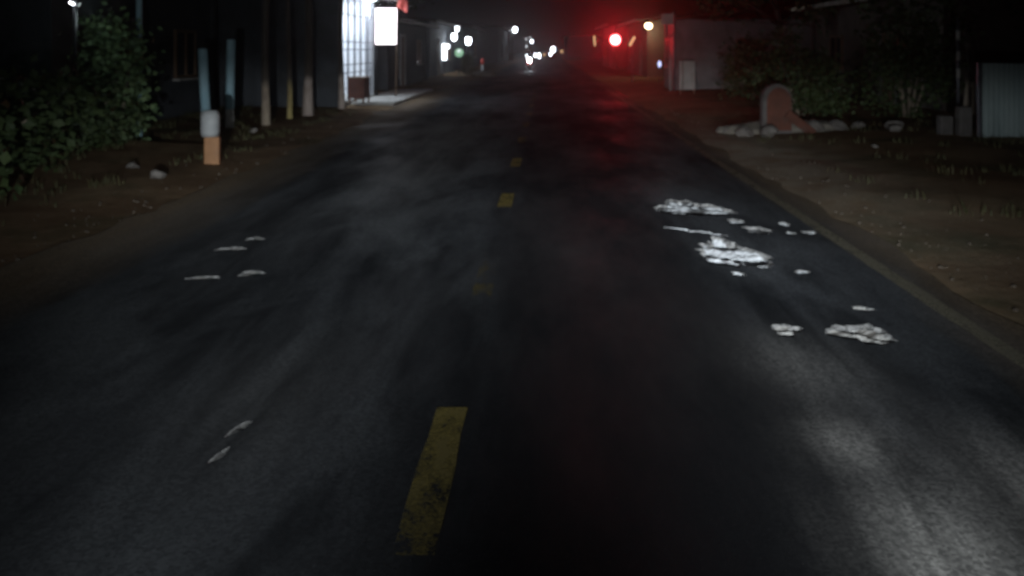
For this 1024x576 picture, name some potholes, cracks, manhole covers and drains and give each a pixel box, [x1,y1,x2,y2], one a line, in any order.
pothole [207,446,230,464]
pothole [695,237,775,270]
pothole [825,323,897,346]
pothole [223,421,253,438]
pothole [771,324,803,337]
pothole [653,199,736,216]
